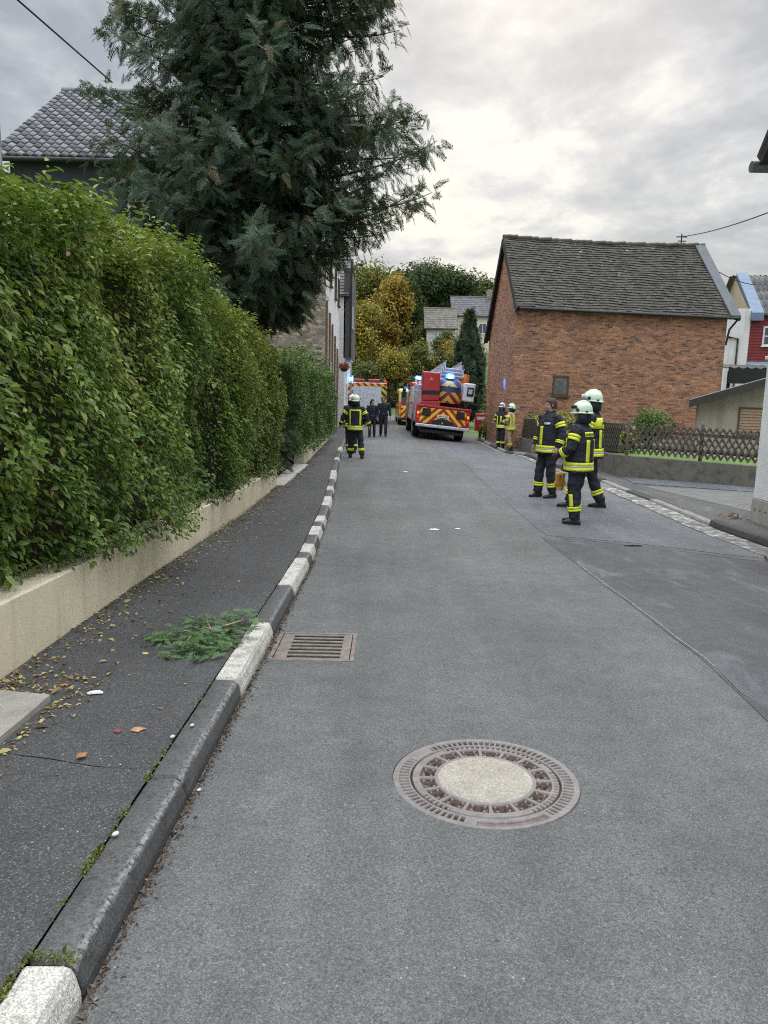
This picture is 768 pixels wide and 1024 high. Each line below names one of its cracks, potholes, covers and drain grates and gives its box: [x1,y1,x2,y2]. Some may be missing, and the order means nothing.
manhole cover [393,739,580,830]
drain grate [267,632,357,662]
